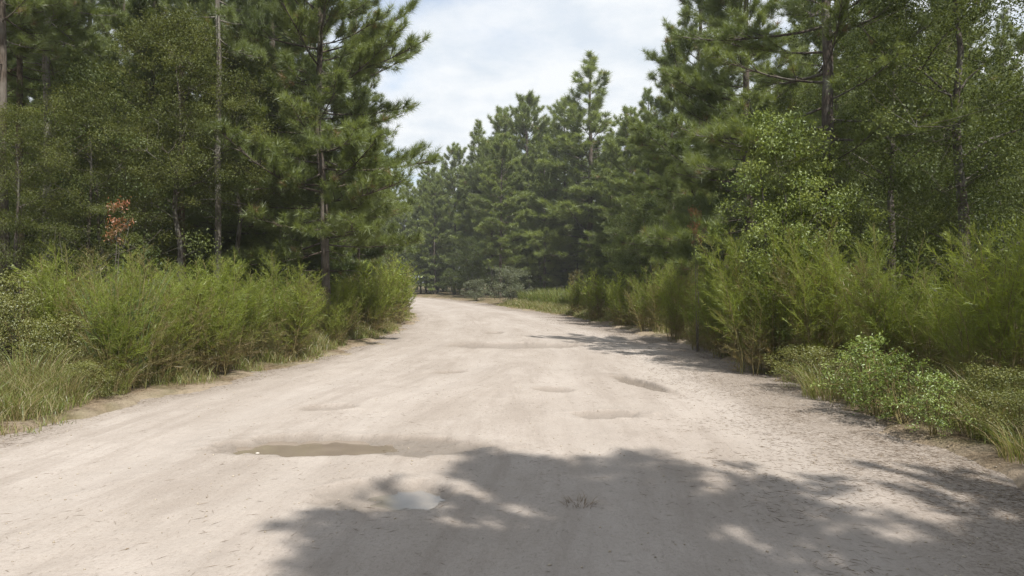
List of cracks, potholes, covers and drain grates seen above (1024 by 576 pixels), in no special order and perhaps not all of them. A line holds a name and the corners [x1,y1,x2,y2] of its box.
pothole [196,432,497,458]
pothole [299,403,359,411]
pothole [571,409,649,419]
pothole [612,375,677,394]
